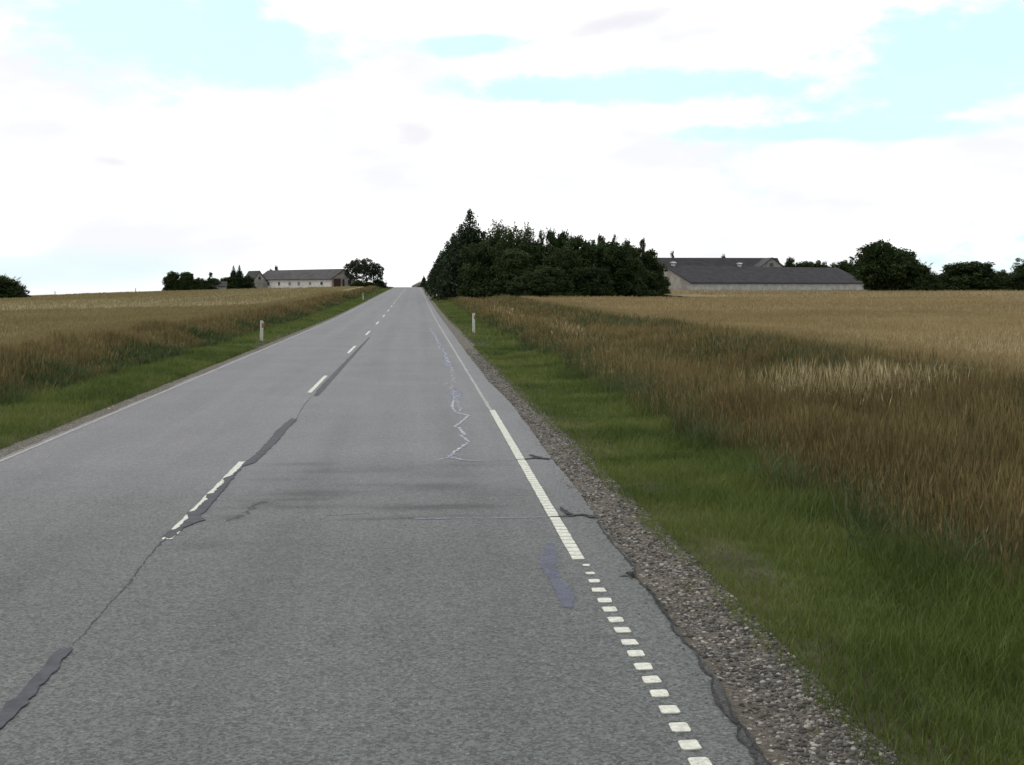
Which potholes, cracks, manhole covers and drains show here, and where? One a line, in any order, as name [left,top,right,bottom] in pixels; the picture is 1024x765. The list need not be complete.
crack [469,454,552,462]
